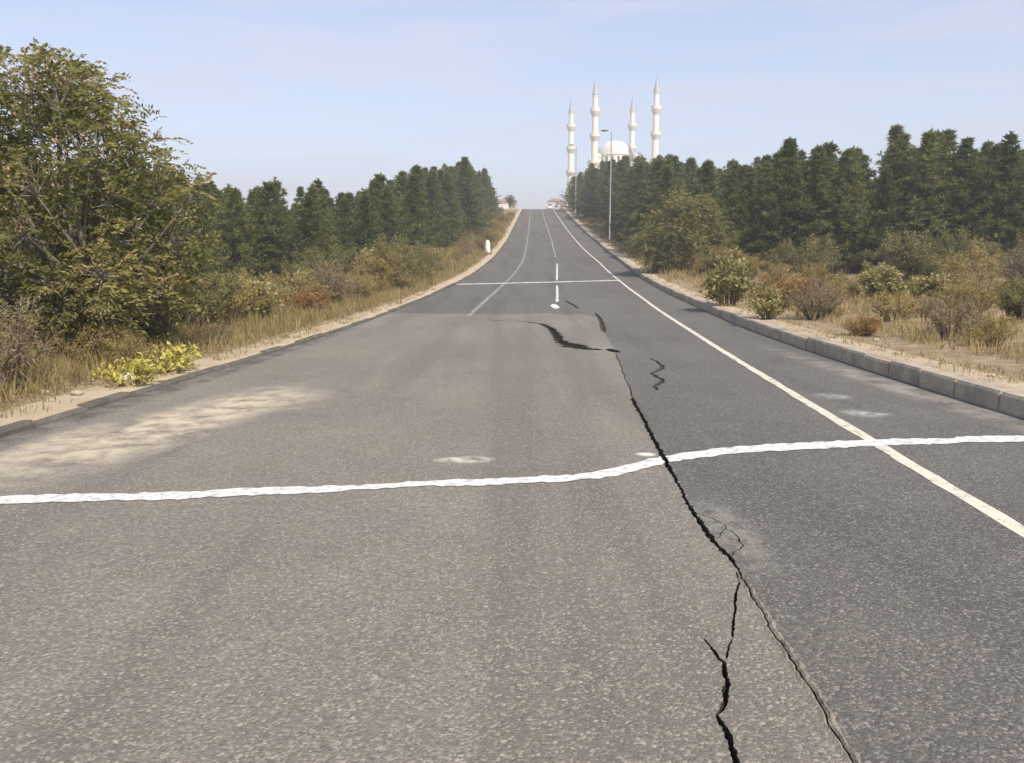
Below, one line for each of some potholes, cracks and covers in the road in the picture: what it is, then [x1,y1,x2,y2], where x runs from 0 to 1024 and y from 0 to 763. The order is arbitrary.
crack [495,300,861,763]
